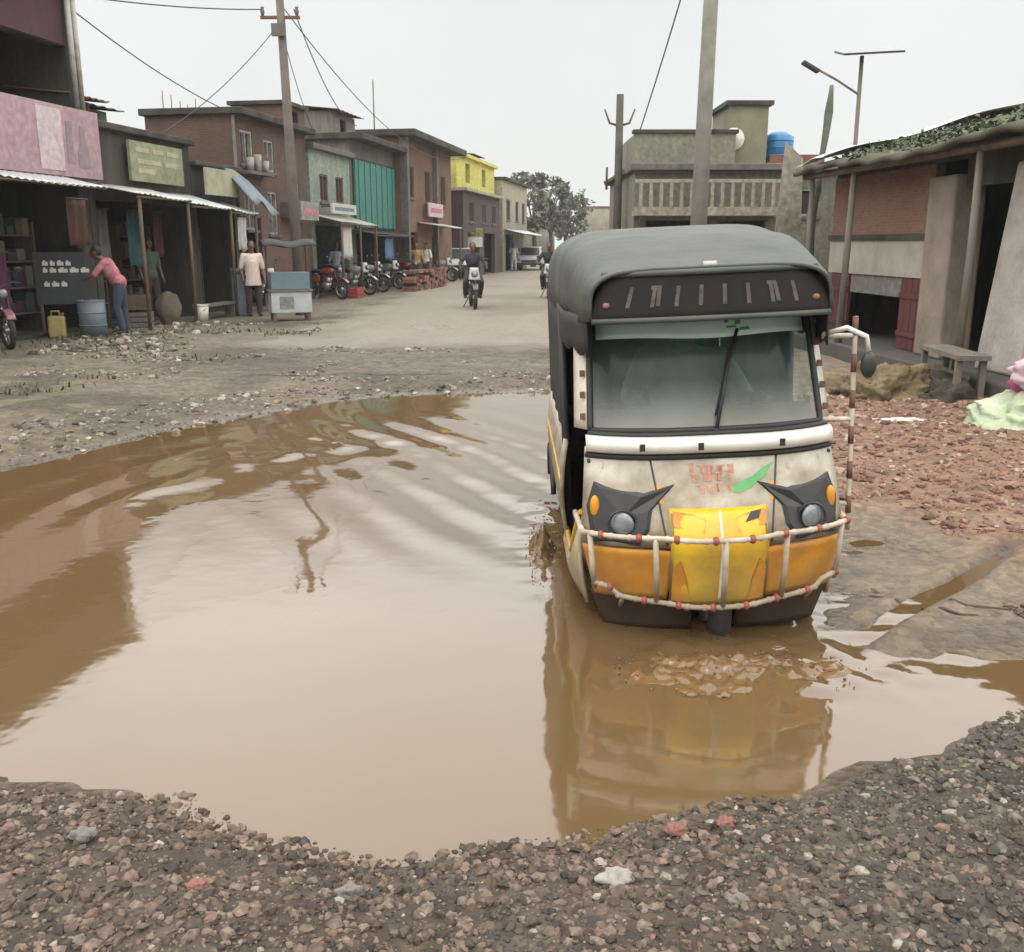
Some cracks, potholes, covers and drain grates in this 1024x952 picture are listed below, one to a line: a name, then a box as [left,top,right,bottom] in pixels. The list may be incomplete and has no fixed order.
crack [869,595,1020,615]
pothole [0,386,1024,901]
